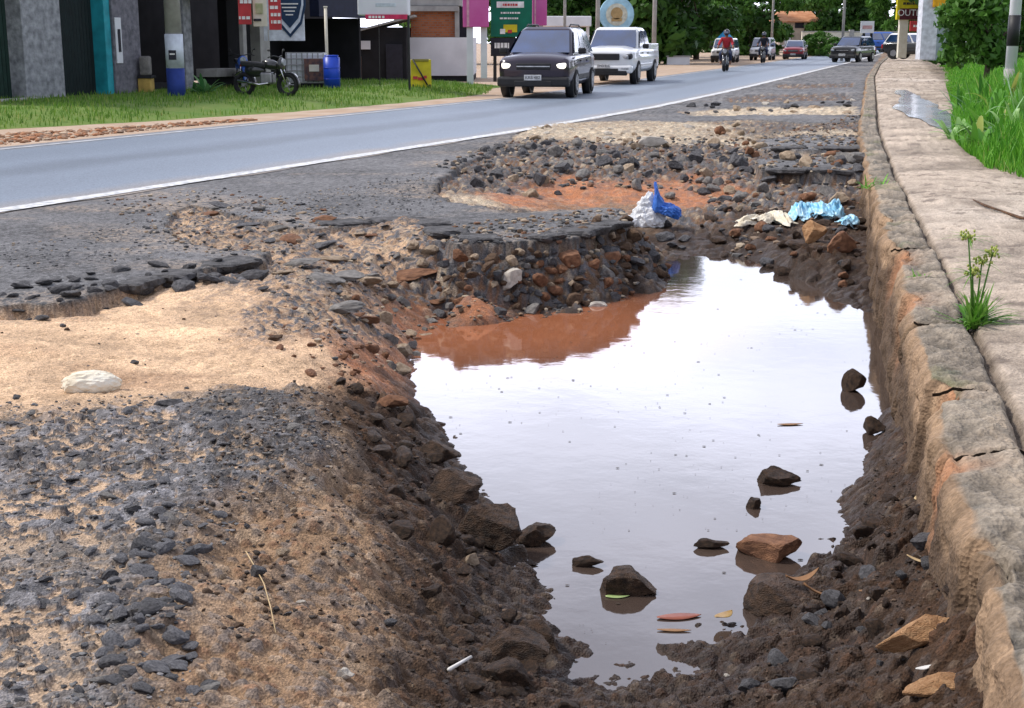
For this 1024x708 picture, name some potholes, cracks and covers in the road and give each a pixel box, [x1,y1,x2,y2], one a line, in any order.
pothole [191,194,983,708]
pothole [435,143,867,282]
pothole [511,119,751,155]
pothole [0,206,457,409]
